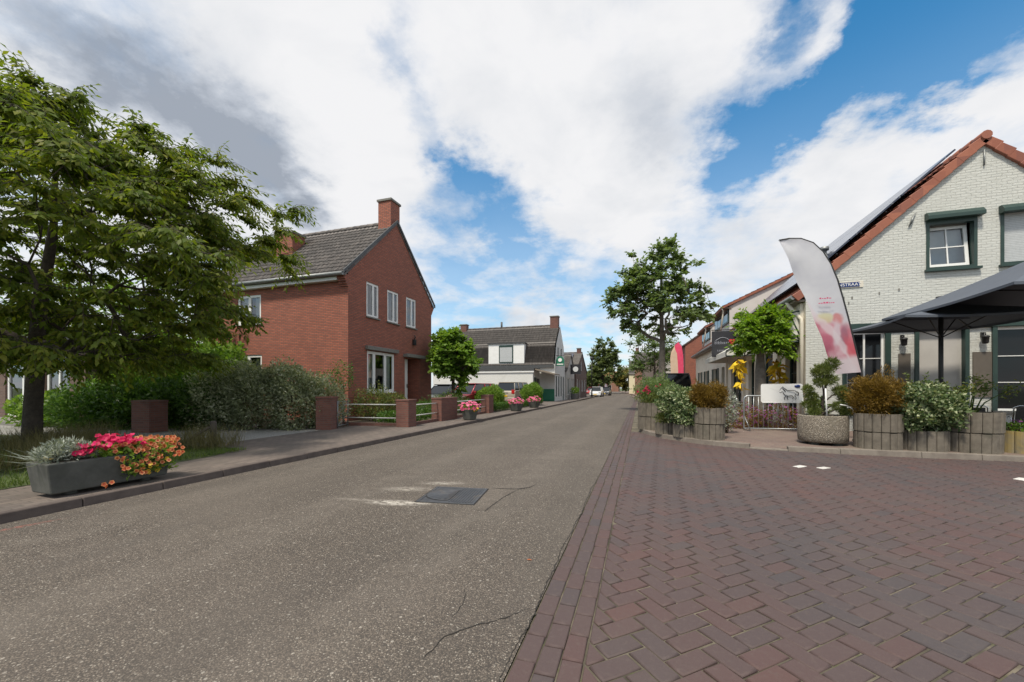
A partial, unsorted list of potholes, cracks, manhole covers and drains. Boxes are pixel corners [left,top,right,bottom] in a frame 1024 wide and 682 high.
manhole cover [415,486,489,505]
crack [421,477,598,682]
